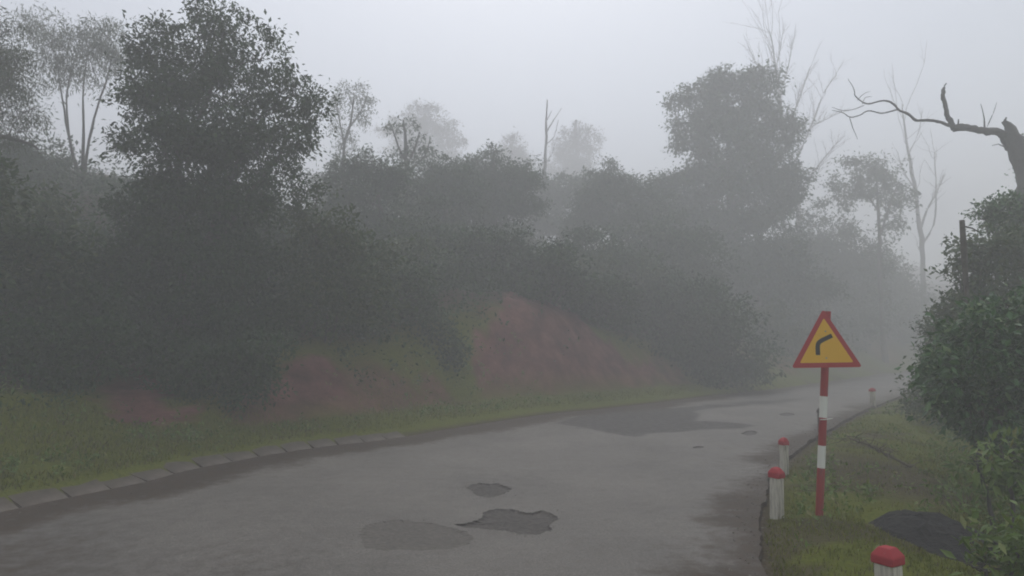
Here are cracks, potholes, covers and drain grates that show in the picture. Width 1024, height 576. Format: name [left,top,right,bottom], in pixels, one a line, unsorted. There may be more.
pothole [466,483,512,498]
pothole [455,509,559,535]
